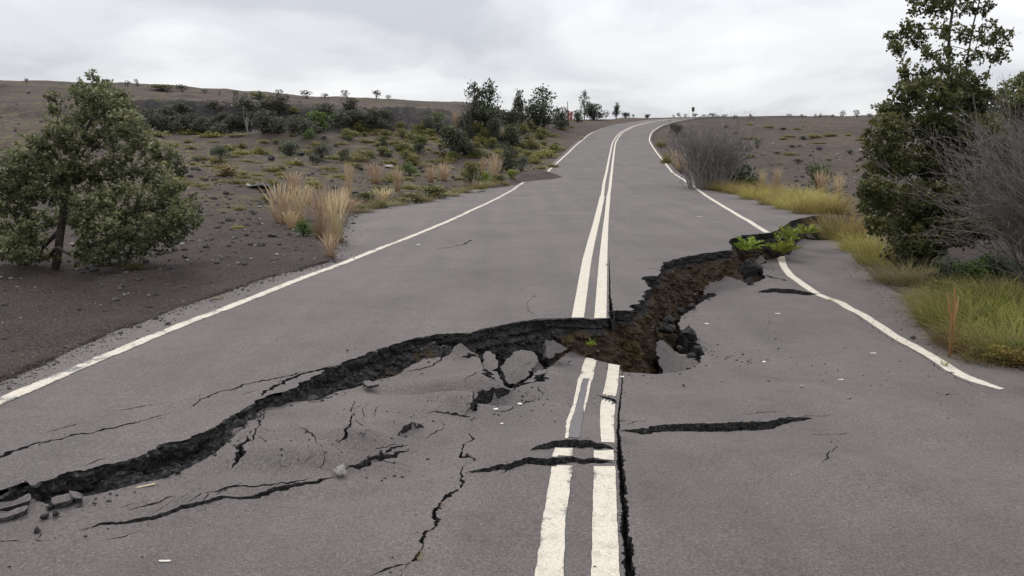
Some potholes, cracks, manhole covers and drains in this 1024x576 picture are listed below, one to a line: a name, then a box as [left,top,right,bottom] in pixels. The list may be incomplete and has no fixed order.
crack [0,215,910,576]
